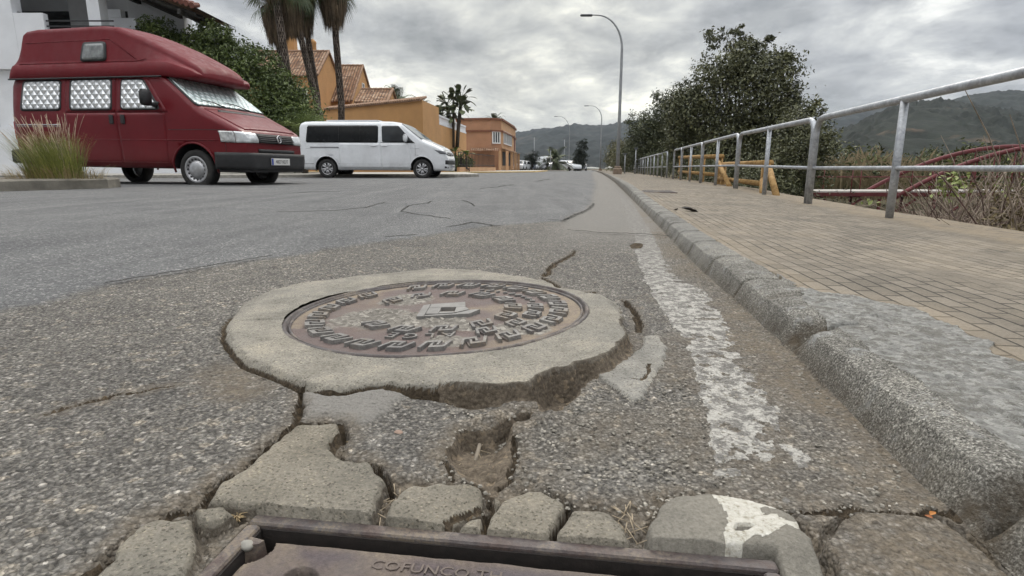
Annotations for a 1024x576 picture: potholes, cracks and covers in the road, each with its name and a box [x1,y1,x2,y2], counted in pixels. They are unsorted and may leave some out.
crack [105,255,270,283]
manhole cover [282,280,589,358]
crack [80,318,440,576]
crack [43,386,174,416]
pothole [444,411,534,510]
crack [401,184,513,227]
crack [541,251,596,294]
crack [776,505,963,524]
